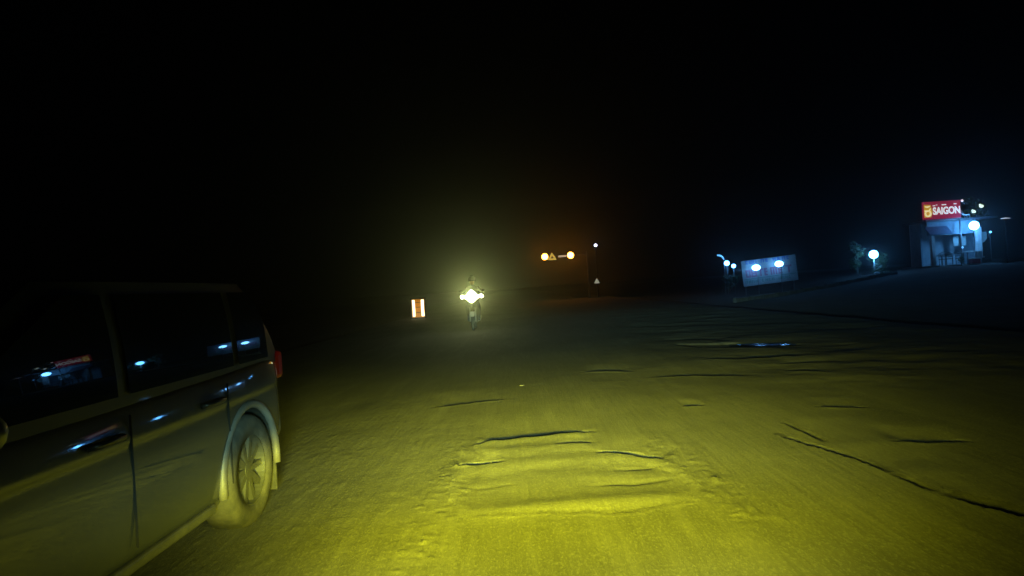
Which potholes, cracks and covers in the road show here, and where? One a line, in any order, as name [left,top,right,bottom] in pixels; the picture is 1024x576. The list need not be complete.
crack [774,422,1024,517]
crack [435,399,503,408]
